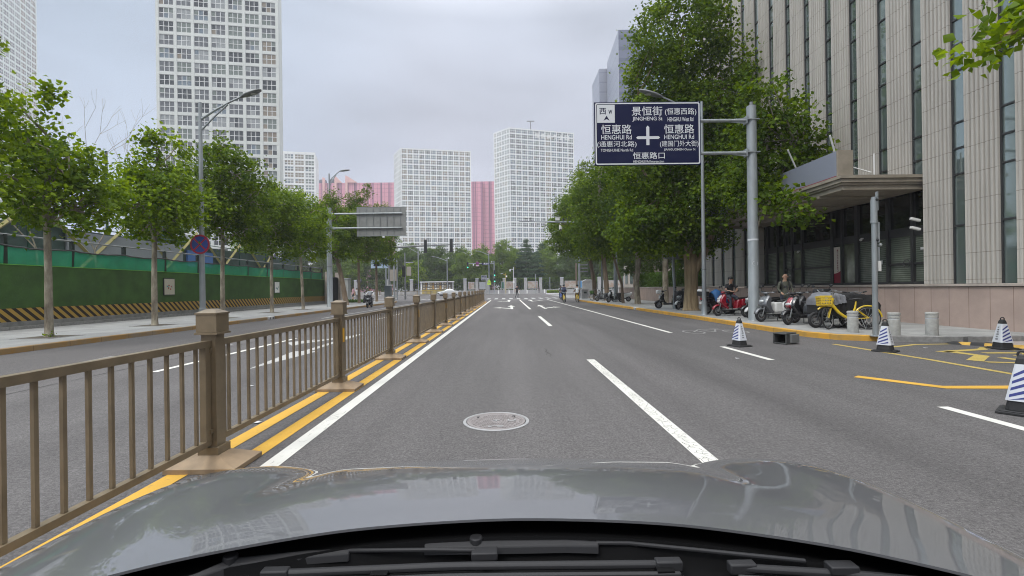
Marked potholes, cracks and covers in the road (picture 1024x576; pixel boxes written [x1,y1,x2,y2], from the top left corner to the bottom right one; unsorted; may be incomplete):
manhole cover [463,412,529,431]
